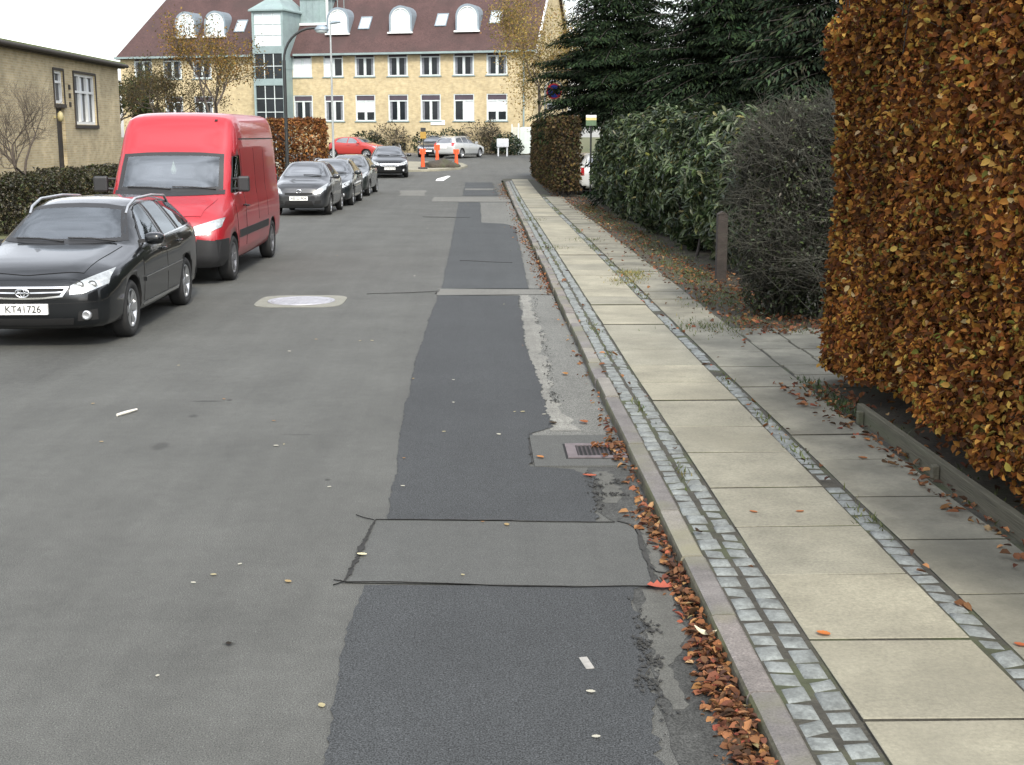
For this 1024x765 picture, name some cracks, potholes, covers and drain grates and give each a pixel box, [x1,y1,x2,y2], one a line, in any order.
crack [333,514,376,585]
crack [627,597,681,741]
manhole cover [254,295,347,308]
crack [585,470,675,583]
